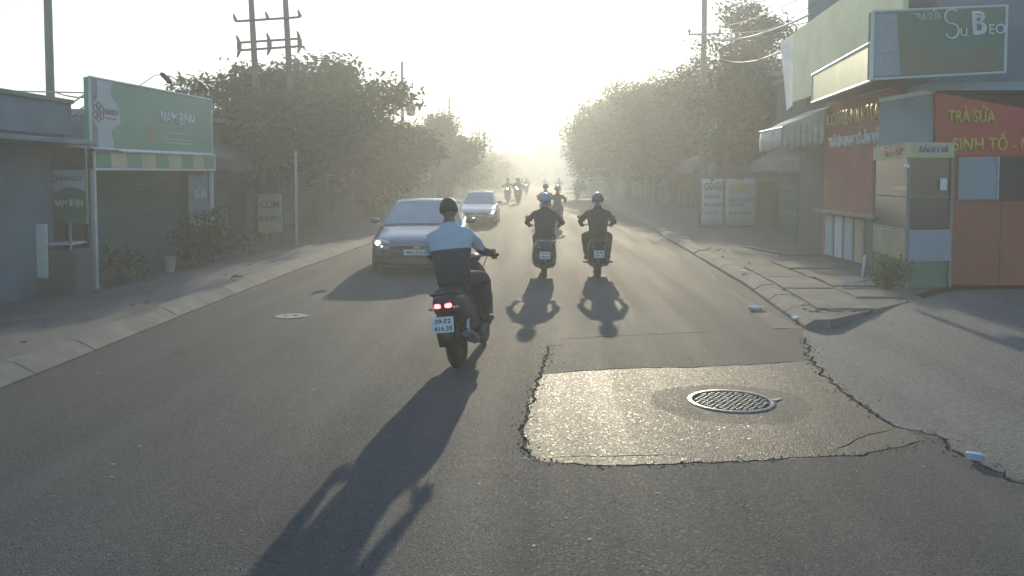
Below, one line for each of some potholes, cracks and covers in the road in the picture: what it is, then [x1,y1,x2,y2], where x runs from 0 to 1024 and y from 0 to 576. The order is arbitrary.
crack [511,336,1024,485]
manhole cover [688,389,782,413]
